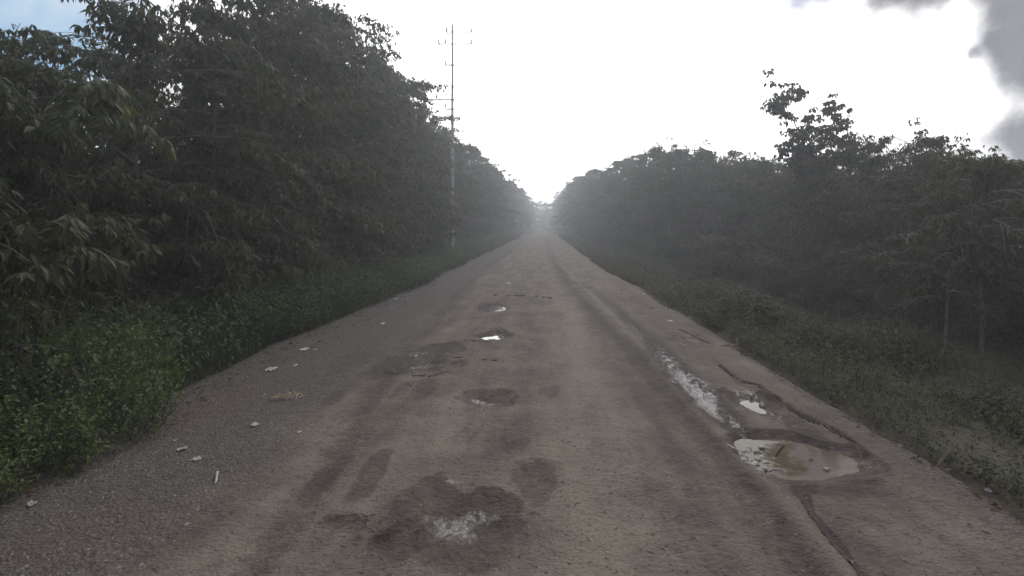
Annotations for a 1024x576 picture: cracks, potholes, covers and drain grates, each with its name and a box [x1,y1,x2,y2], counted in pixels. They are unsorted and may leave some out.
crack [791,482,868,576]
pothole [448,387,522,409]
pothole [401,470,531,566]
pothole [474,302,513,313]
pothole [656,351,746,434]
pothole [499,456,567,515]
pothole [714,425,887,492]
crack [719,365,871,459]
pothole [468,327,516,342]
pothole [354,339,469,383]
pothole [711,385,794,421]
